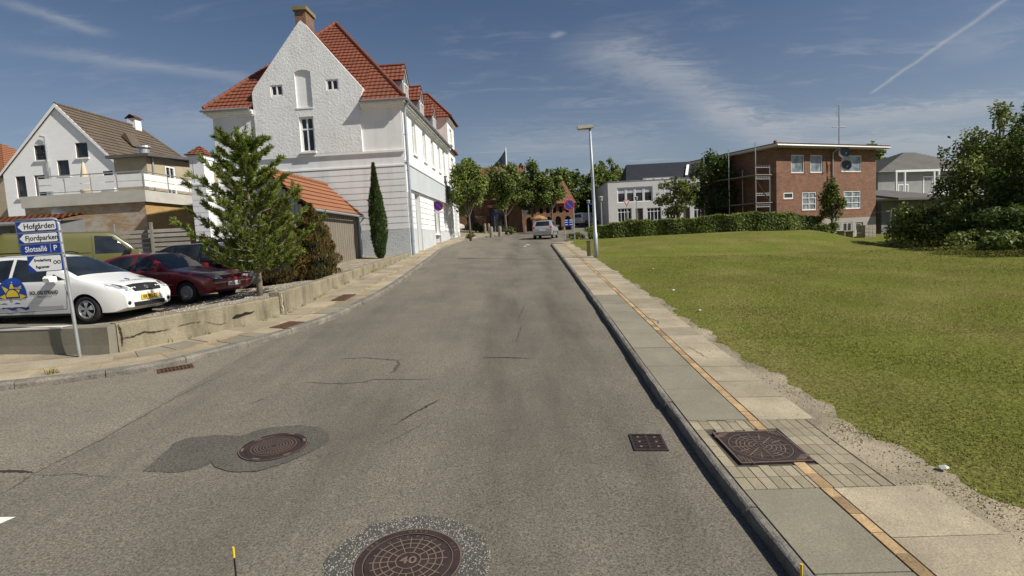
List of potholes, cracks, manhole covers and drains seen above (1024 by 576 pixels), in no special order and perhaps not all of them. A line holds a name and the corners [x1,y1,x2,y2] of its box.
crack [384,399,440,444]
drain grate [157,363,195,374]
crack [308,357,421,384]
drain grate [629,434,669,451]
manhole cover [353,529,462,576]
crack [484,306,531,359]
manhole cover [712,429,815,466]
manhole cover [238,432,308,462]
